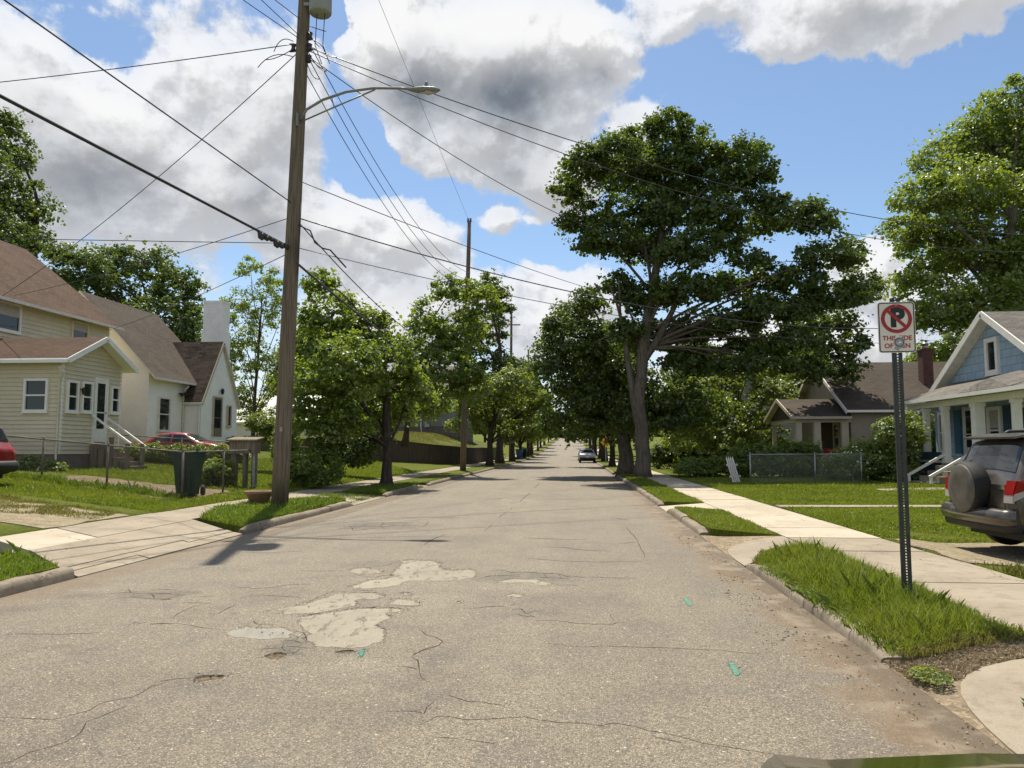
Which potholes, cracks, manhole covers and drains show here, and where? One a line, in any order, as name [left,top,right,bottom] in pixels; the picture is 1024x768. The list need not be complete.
crack [478,517,645,586]
crack [109,563,395,629]
pothole [261,647,294,663]
crack [400,630,443,683]
crack [2,678,184,764]
pothole [189,672,230,684]
crack [353,695,772,754]
